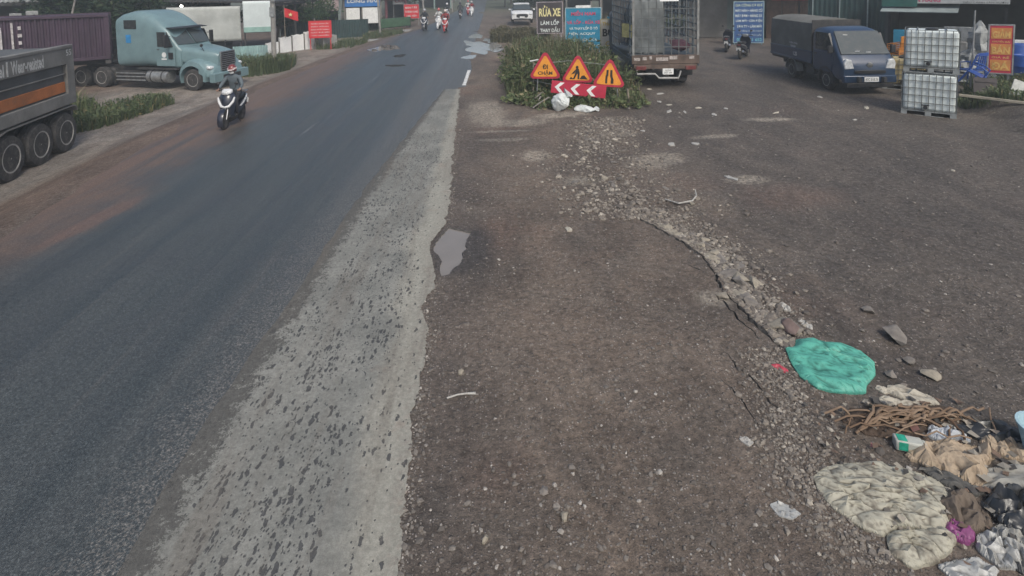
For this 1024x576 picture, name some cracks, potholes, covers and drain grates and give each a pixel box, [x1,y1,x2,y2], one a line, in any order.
crack [625,214,806,453]
pothole [433,227,472,276]
pothole [366,44,401,52]
